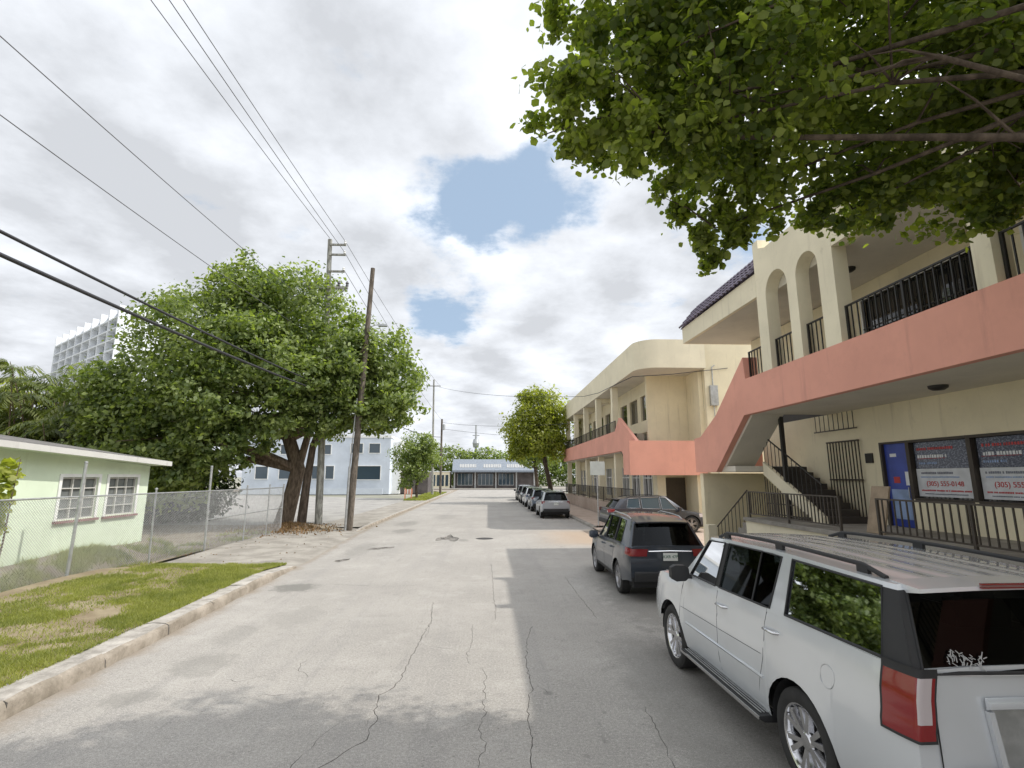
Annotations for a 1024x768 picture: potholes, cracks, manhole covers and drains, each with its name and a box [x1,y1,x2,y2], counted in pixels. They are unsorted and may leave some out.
crack [290,603,434,768]
crack [525,627,534,768]
crack [466,625,493,767]
